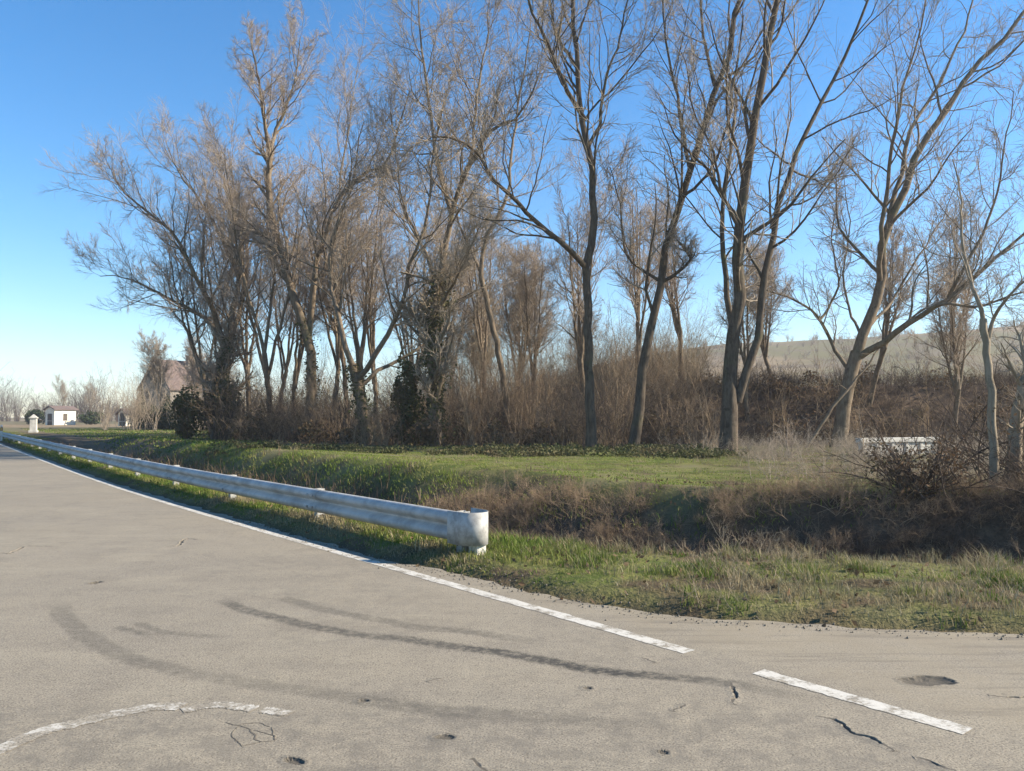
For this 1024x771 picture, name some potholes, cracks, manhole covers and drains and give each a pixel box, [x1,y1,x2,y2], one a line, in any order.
pothole [352,697,376,705]
pothole [650,747,677,759]
crack [226,722,276,746]
crack [814,714,963,771]
pothole [277,754,313,768]
pothole [427,732,462,743]
crack [0,546,52,555]
pothole [891,674,965,688]
crack [724,682,745,704]
crack [166,538,201,547]
